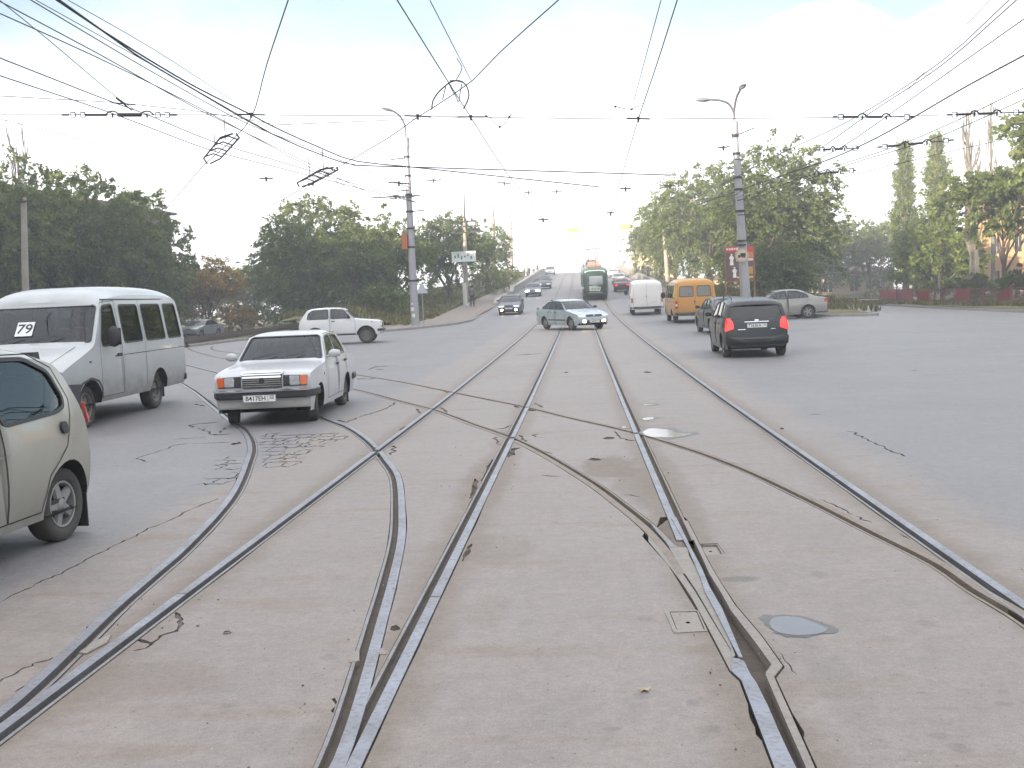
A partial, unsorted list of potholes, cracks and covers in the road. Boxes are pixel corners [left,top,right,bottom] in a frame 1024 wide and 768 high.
crack [0,658,52,692]
crack [136,404,240,485]
manhole cover [665,610,708,633]
crack [849,431,905,456]
crack [134,612,184,651]
crack [258,402,395,468]
manhole cover [700,543,725,556]
